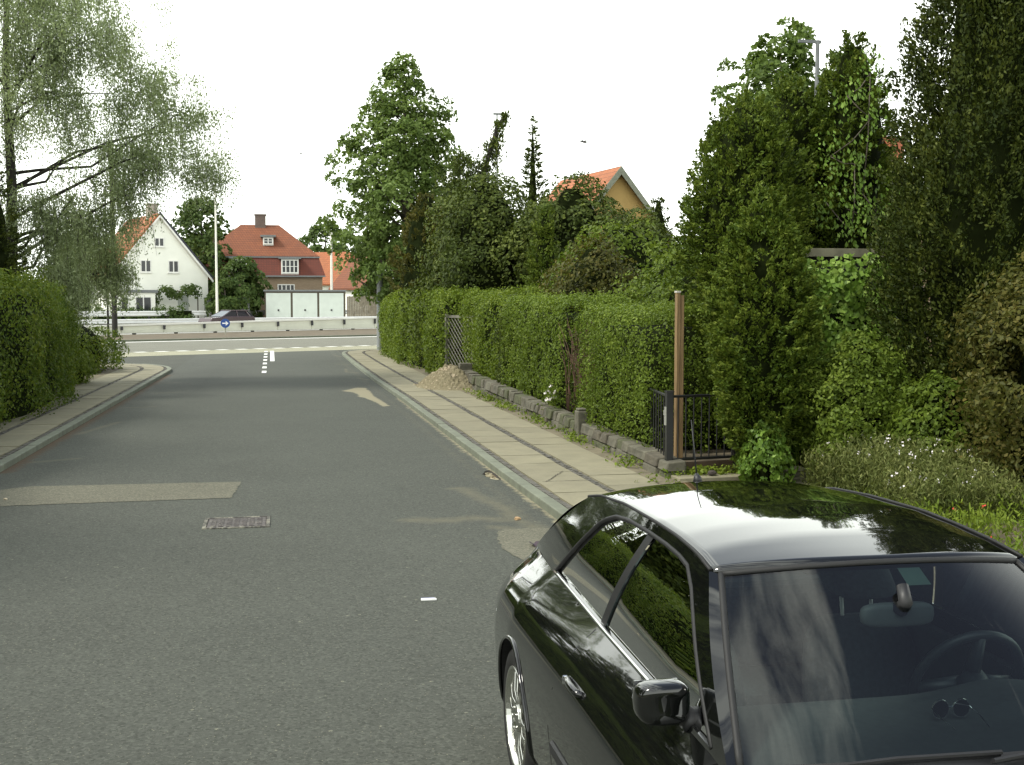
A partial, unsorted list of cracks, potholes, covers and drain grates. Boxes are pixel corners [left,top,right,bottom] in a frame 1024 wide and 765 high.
pothole [482,470,501,480]
